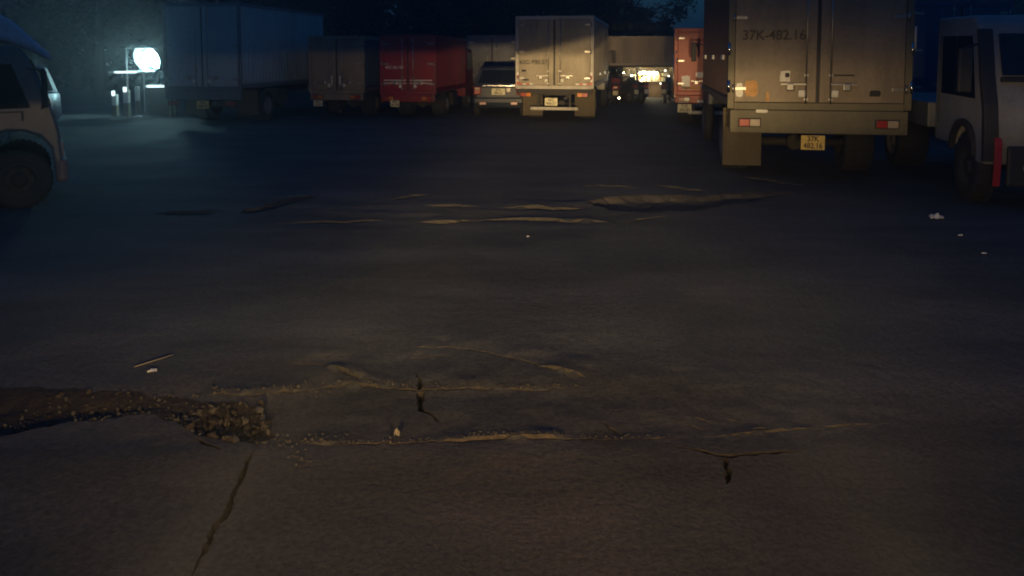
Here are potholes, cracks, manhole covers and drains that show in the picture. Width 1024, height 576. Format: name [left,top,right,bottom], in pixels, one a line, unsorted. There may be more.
crack [205,346,895,484]
pothole [586,191,804,213]
crack [277,185,665,224]
pothole [0,380,392,468]
crack [191,438,258,576]
